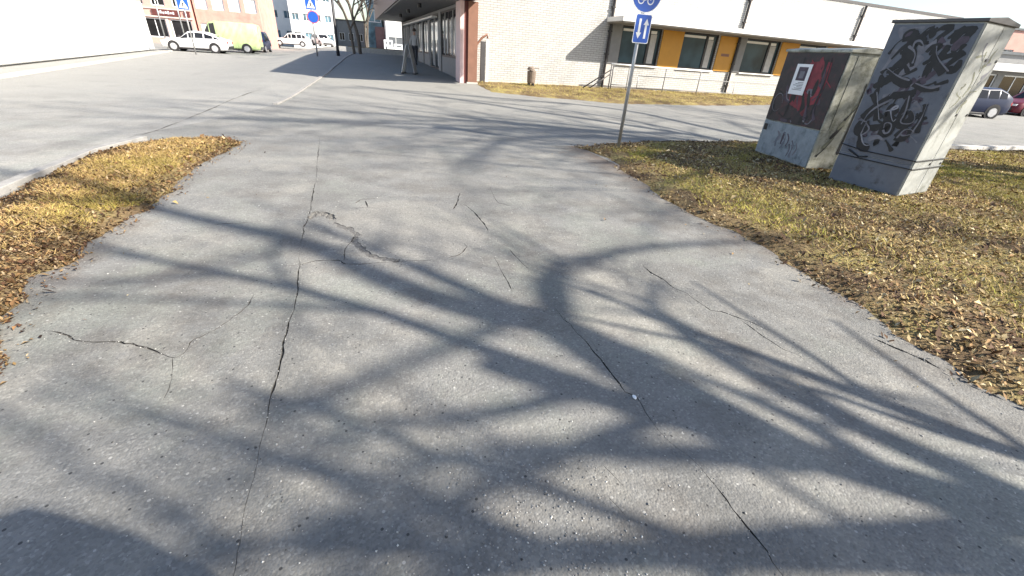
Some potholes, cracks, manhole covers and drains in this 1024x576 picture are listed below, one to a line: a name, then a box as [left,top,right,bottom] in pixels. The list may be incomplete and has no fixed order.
crack [53,295,254,400]
crack [646,268,826,378]
crack [224,141,424,576]
crack [555,308,783,576]
